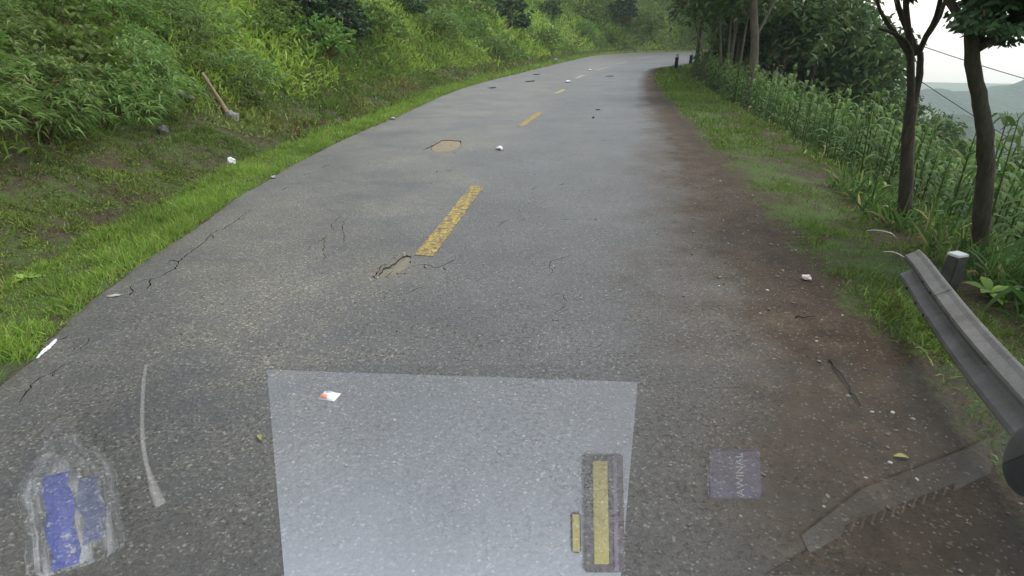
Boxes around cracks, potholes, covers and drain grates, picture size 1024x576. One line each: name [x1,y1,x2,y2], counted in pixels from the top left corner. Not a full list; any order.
pothole [379,255,411,277]
pothole [431,140,461,152]
crack [128,209,252,295]
crack [20,335,89,401]
